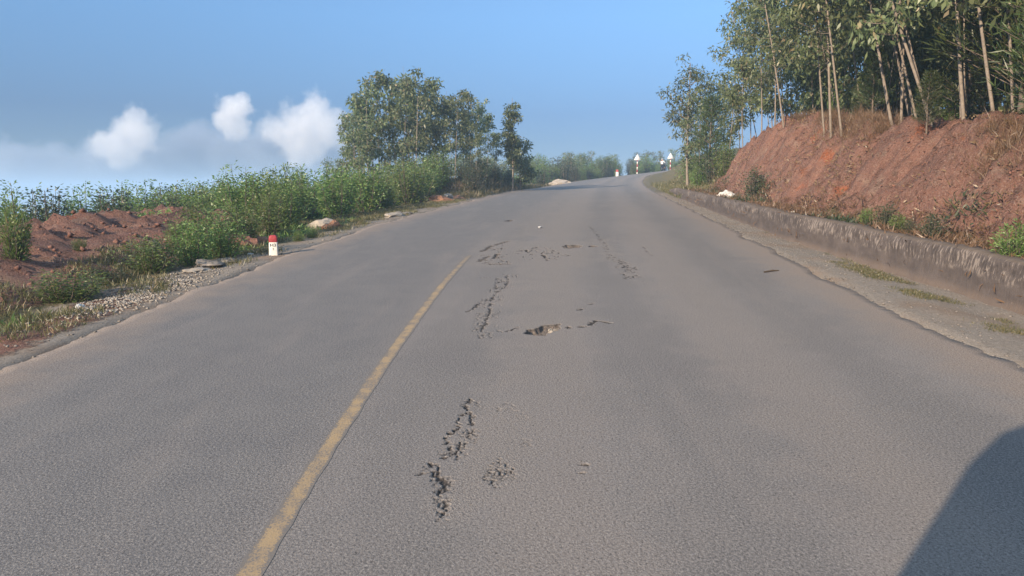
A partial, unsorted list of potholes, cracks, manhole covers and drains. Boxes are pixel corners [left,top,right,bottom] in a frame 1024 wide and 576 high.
pothole [522,323,562,336]
crack [414,398,532,522]
crack [590,227,654,280]
crack [465,247,572,339]
crack [565,302,614,329]
